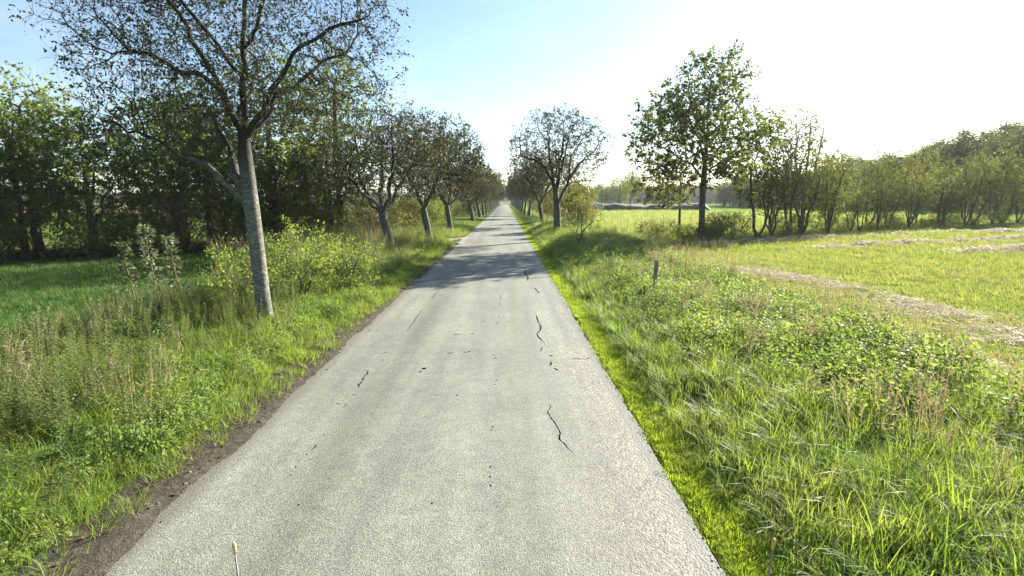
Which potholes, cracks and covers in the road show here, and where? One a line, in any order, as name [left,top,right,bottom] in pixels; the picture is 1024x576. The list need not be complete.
crack [547,403,572,452]
crack [535,314,590,371]
